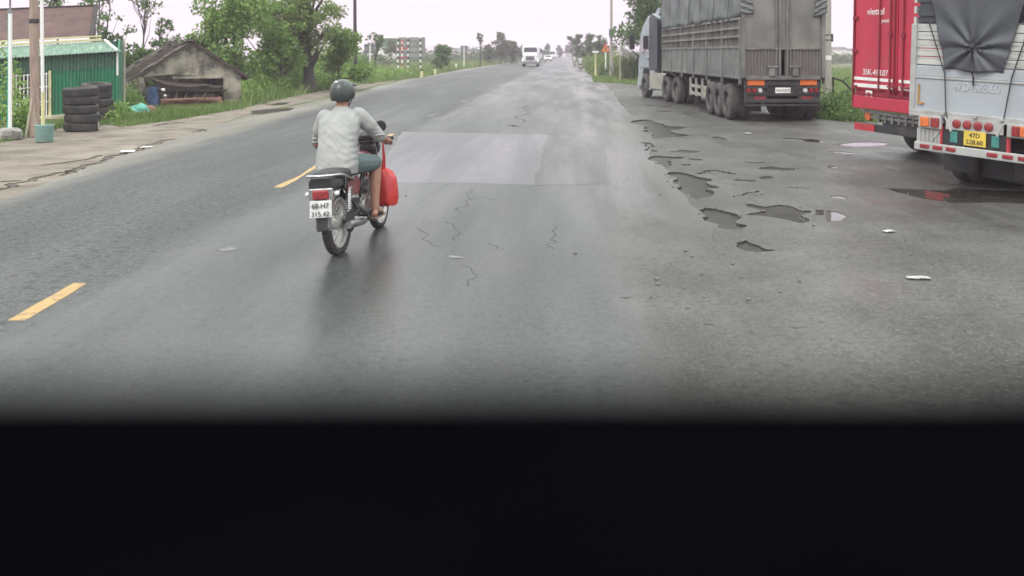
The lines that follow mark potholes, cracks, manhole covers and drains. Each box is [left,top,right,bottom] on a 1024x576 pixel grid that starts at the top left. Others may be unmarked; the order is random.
pothole [744,204,811,223]
pothole [736,240,776,252]
pothole [699,208,747,229]
pothole [631,120,688,139]
pothole [667,172,720,200]
pothole [648,156,684,168]
